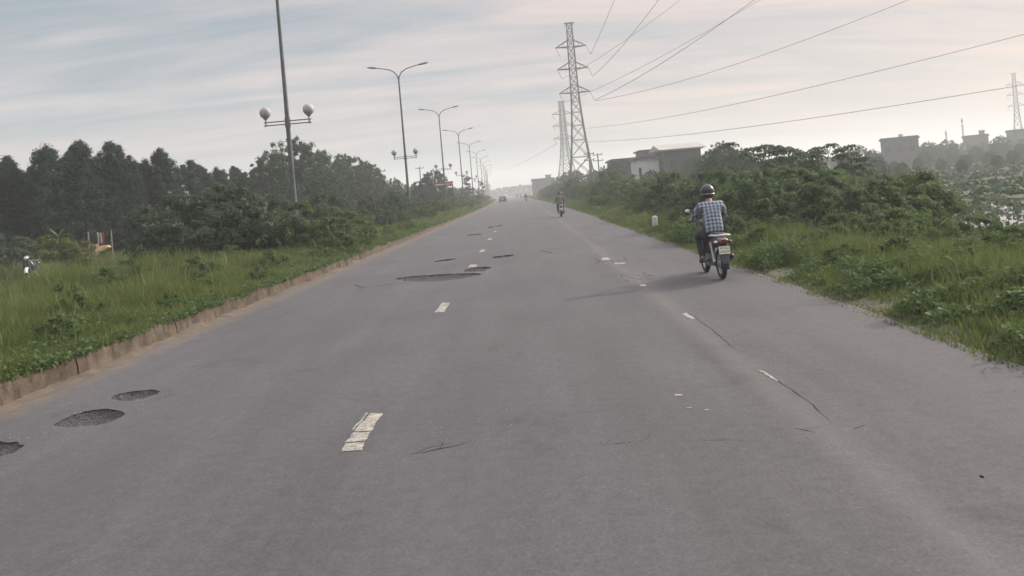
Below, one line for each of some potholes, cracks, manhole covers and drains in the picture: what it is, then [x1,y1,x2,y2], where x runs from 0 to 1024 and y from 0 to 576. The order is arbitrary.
pothole [54,409,124,428]
crack [767,372,830,433]
pothole [111,390,160,401]
pothole [0,441,24,456]
pothole [396,273,483,282]
